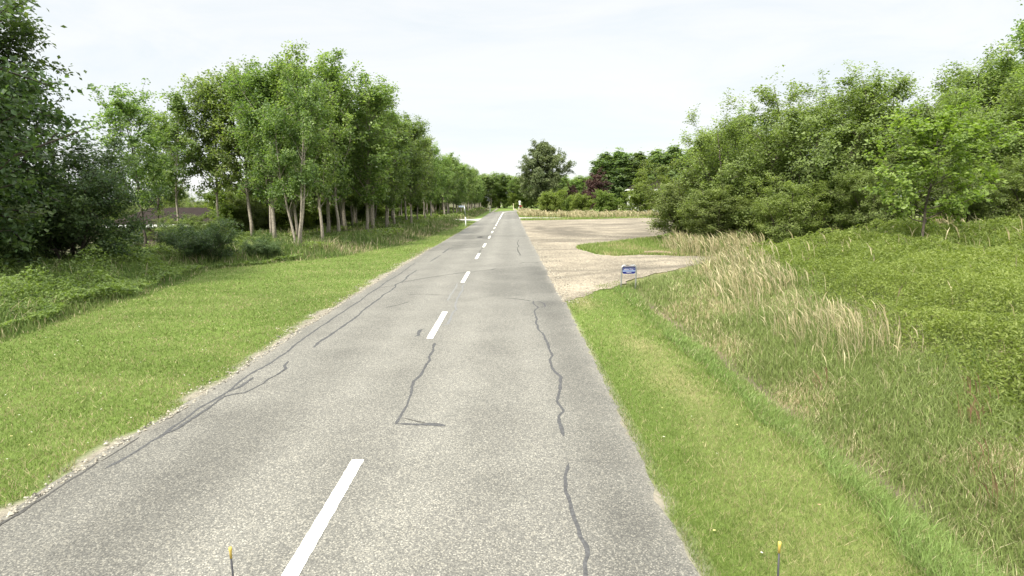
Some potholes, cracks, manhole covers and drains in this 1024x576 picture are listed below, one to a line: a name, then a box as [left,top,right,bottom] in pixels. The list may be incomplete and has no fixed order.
crack [0,437,139,525]
